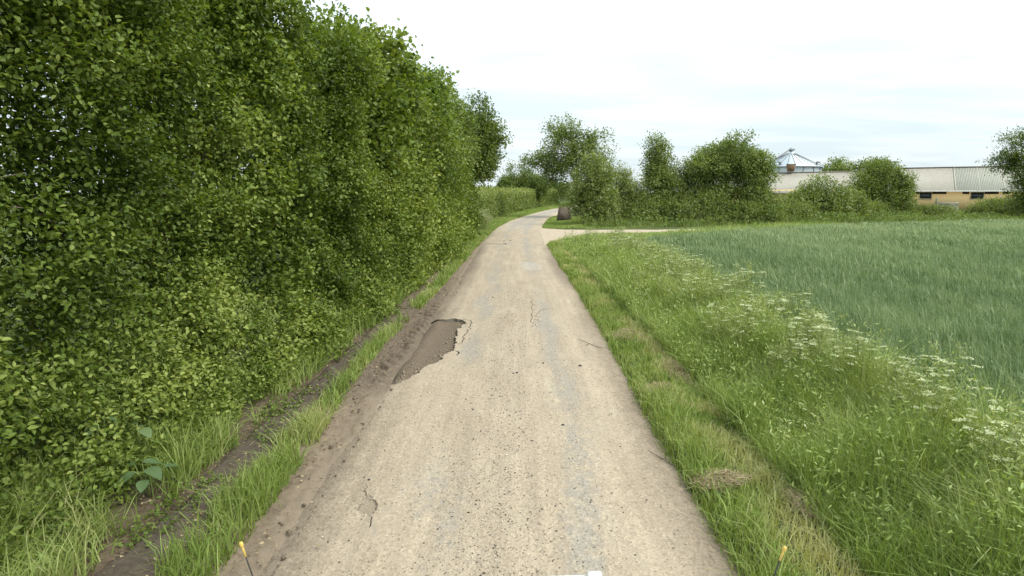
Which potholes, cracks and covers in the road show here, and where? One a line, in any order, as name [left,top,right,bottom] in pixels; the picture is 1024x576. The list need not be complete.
pothole [392,318,467,384]
